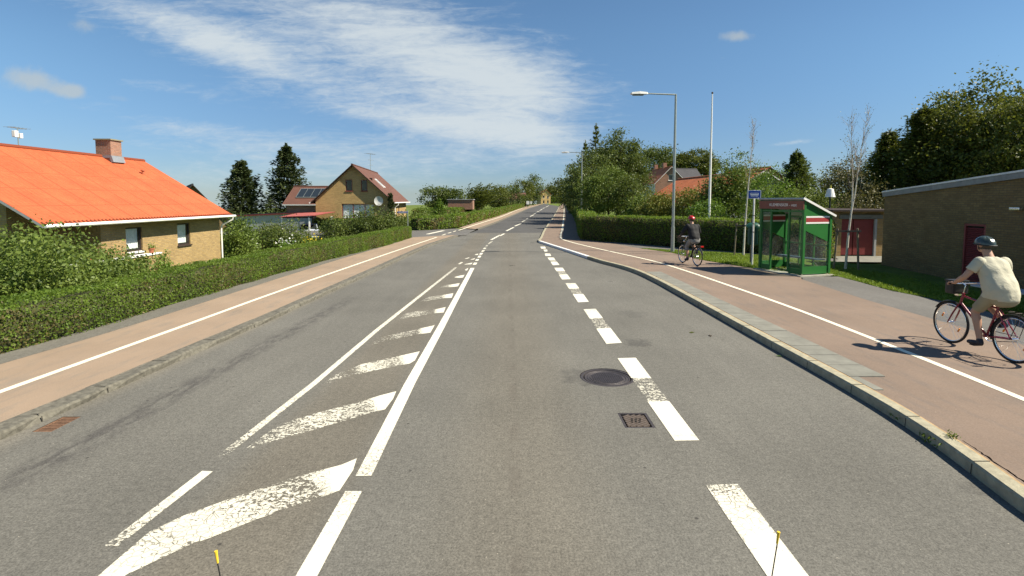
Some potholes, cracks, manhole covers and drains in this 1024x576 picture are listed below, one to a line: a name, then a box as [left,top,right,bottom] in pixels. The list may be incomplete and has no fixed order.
drain grate [618,413,655,428]
drain grate [33,417,79,432]
manhole cover [580,368,635,387]
